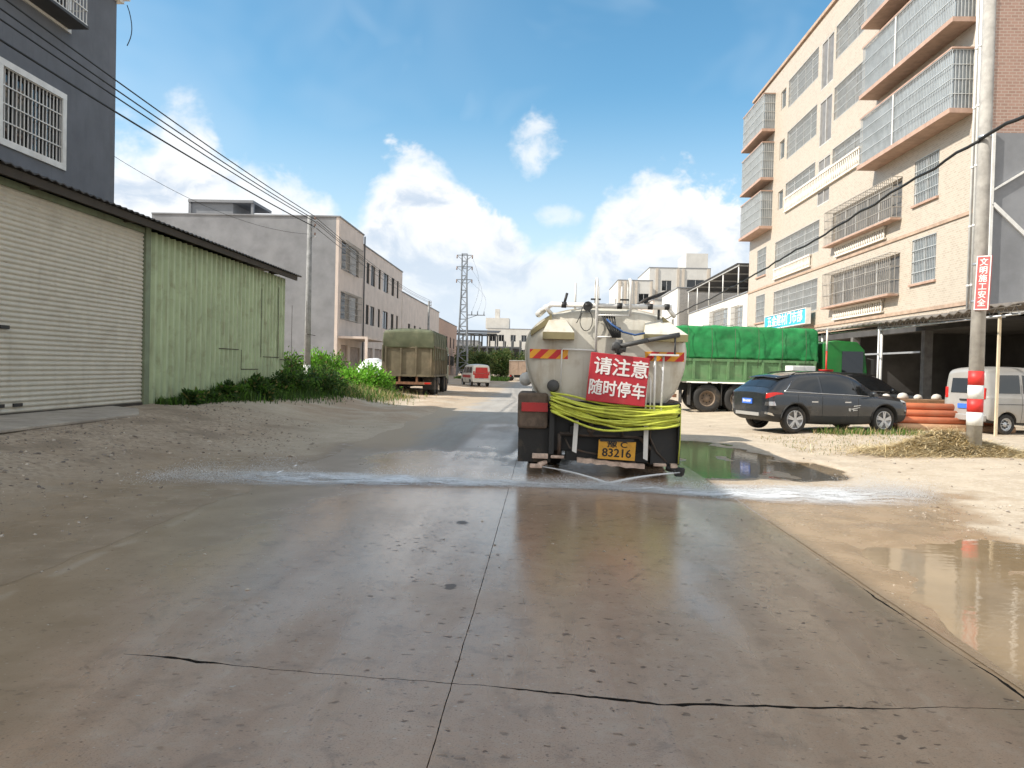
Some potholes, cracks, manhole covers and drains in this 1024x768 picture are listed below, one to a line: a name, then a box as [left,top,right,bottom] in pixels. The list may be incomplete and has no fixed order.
crack [162,457,854,768]
